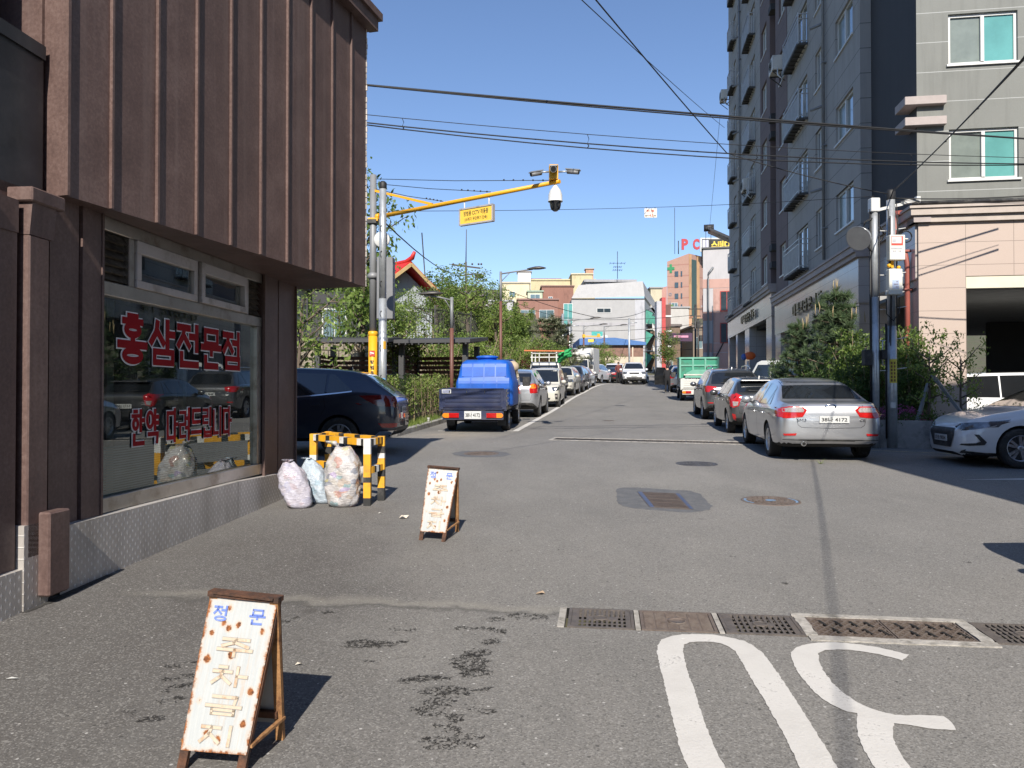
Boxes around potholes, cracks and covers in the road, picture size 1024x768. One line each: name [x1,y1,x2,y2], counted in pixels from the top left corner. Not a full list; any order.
drain grate [790,613,1002,648]
manhole cover [741,496,801,506]
